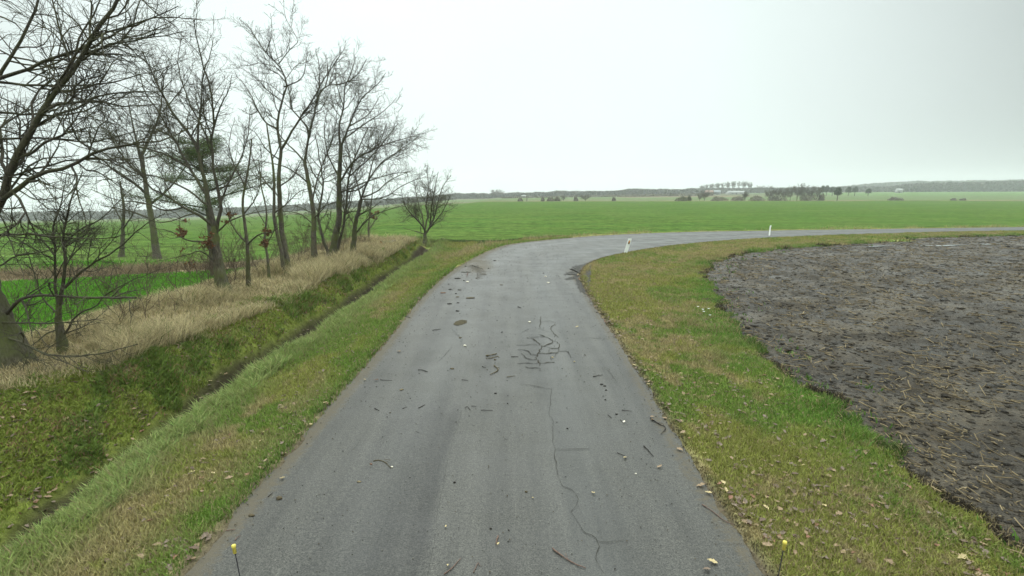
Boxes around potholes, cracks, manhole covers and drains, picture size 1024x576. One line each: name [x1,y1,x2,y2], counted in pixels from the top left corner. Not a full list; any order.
crack [509,317,620,573]
